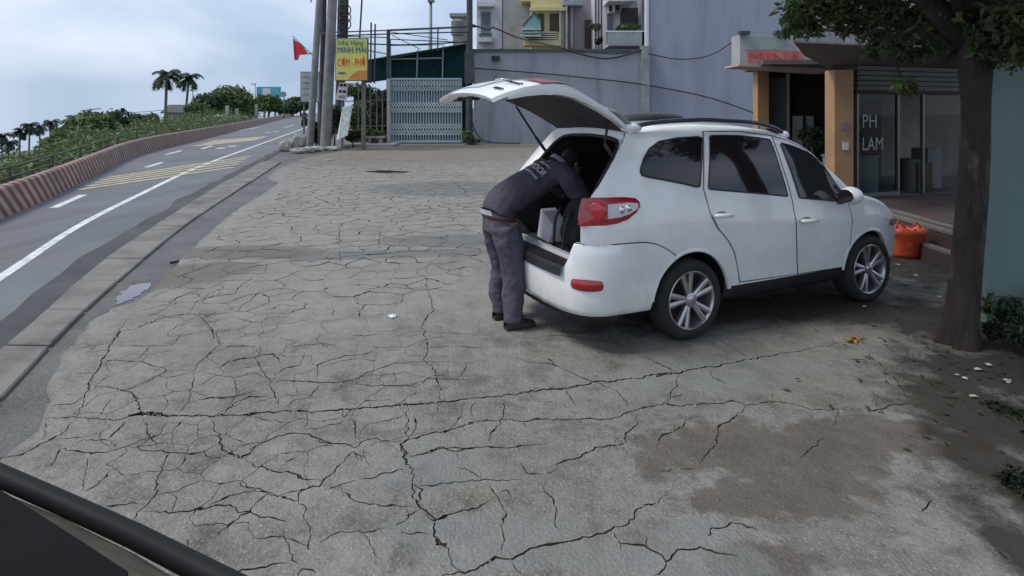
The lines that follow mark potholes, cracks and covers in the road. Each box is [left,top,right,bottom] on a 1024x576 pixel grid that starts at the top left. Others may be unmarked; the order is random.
crack [0,159,912,576]
